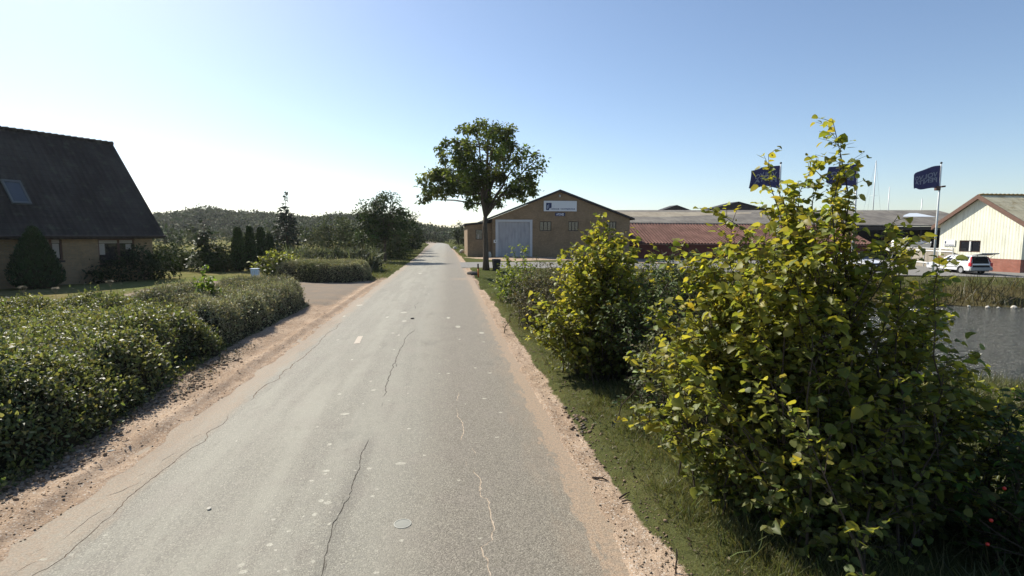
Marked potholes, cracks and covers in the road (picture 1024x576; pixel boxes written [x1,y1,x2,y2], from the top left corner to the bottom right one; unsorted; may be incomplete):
crack [382,332,412,404]
manhole cover [394,519,411,529]
crack [321,440,369,576]
crack [456,395,495,576]
